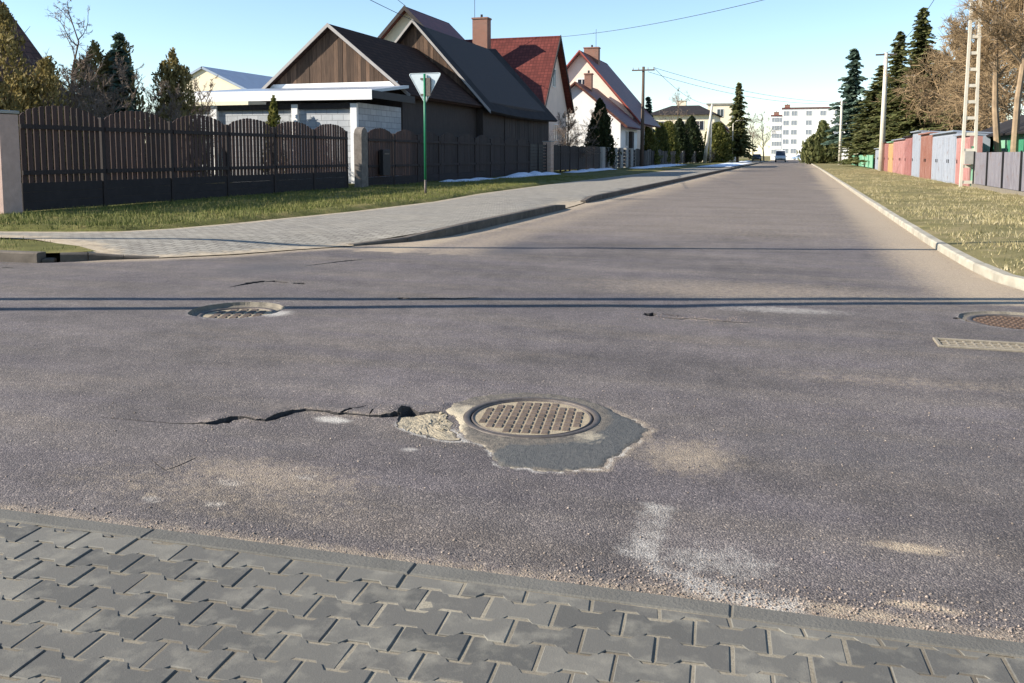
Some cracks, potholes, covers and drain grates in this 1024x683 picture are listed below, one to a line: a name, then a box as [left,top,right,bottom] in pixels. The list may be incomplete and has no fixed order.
manhole cover [958,311,1024,330]
manhole cover [188,302,285,318]
manhole cover [463,397,601,439]
crack [101,405,401,425]
drain grate [932,337,1024,352]
crack [662,313,755,323]
